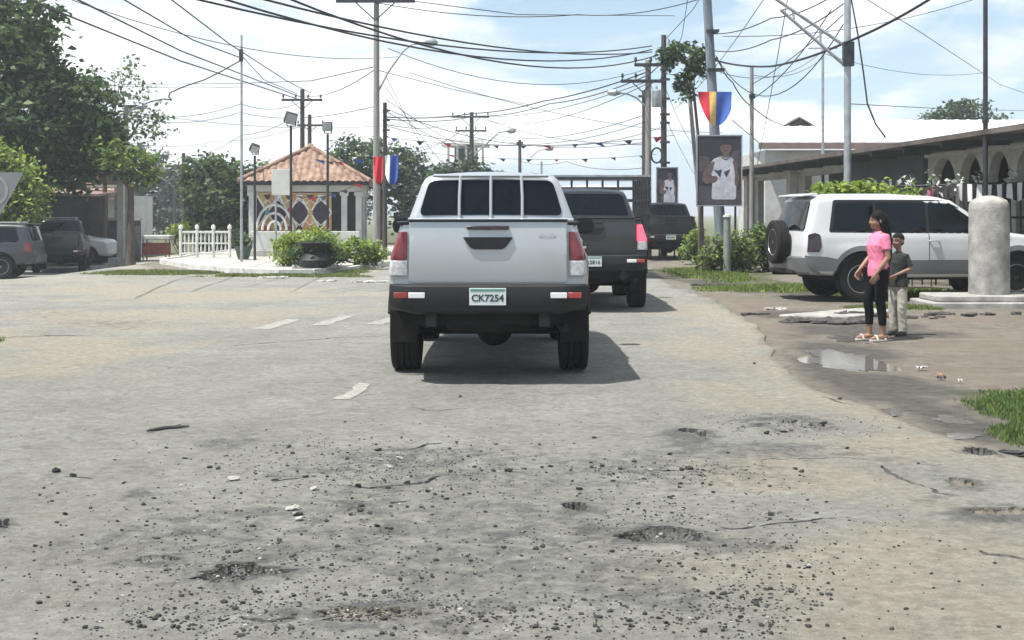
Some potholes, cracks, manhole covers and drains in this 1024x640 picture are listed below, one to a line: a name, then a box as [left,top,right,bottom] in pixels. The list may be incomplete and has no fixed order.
pothole [311,606,434,623]
pothole [612,525,714,543]
crack [981,551,1024,560]
crack [762,457,954,496]
pothole [695,430,716,439]
crack [721,518,832,530]
pothole [189,561,299,583]
crack [347,476,438,503]
pothole [961,507,1024,515]
pothole [750,419,833,432]
pothole [962,447,998,456]
pothole [944,477,983,488]
